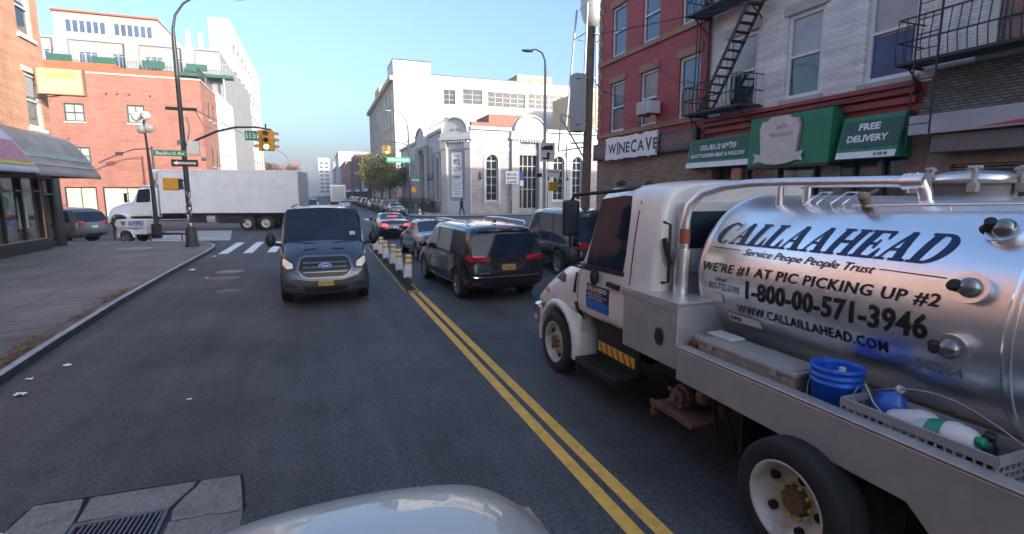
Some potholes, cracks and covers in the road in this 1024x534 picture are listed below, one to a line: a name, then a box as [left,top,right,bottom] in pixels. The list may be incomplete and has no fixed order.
drain grate [67,507,170,534]
